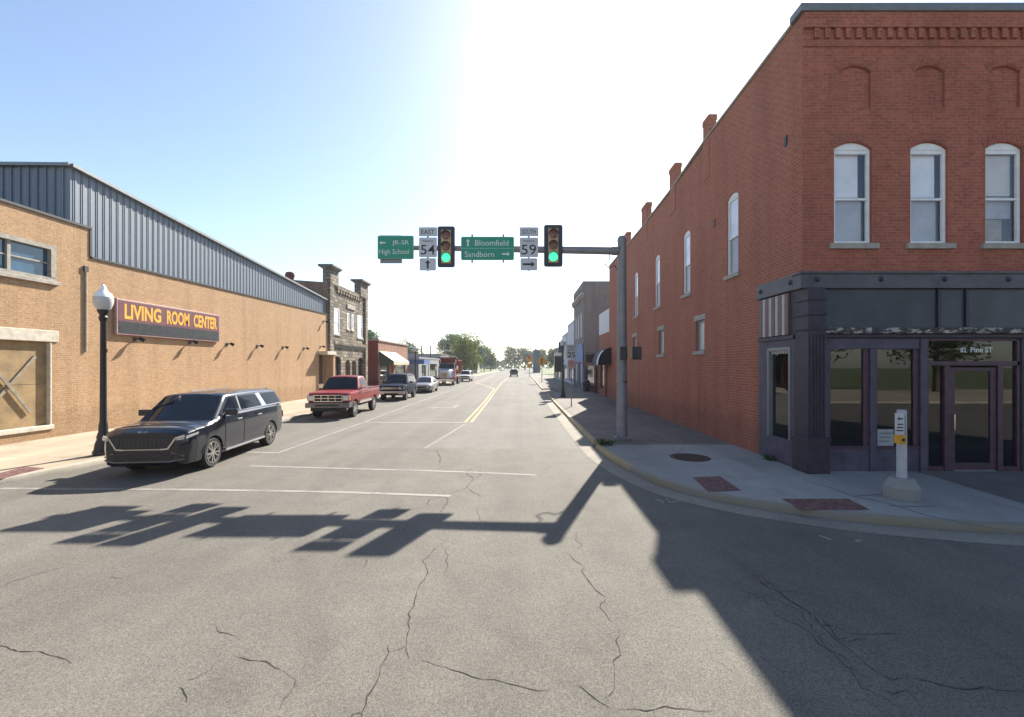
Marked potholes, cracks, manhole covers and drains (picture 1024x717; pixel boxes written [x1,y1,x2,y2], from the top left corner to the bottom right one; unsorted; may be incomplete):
crack [427,469,483,517]
manhole cover [670,453,711,462]
crack [180,624,296,707]
crack [570,536,715,711]
crack [350,548,544,717]
crack [733,571,1021,710]
